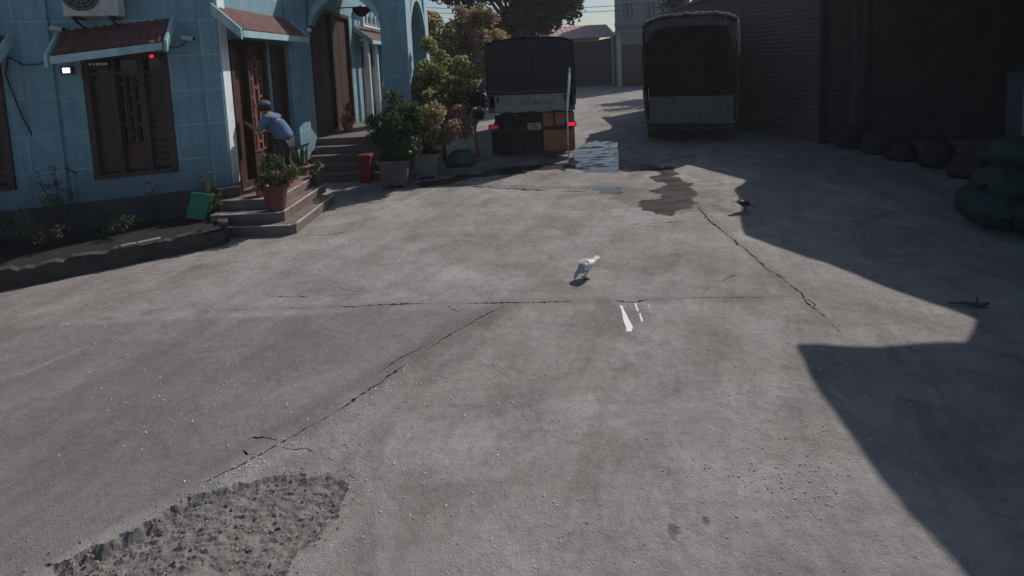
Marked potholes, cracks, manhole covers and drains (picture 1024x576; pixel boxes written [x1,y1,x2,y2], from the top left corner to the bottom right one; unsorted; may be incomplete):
crack [240,207,841,333]
pothole [22,462,359,576]
